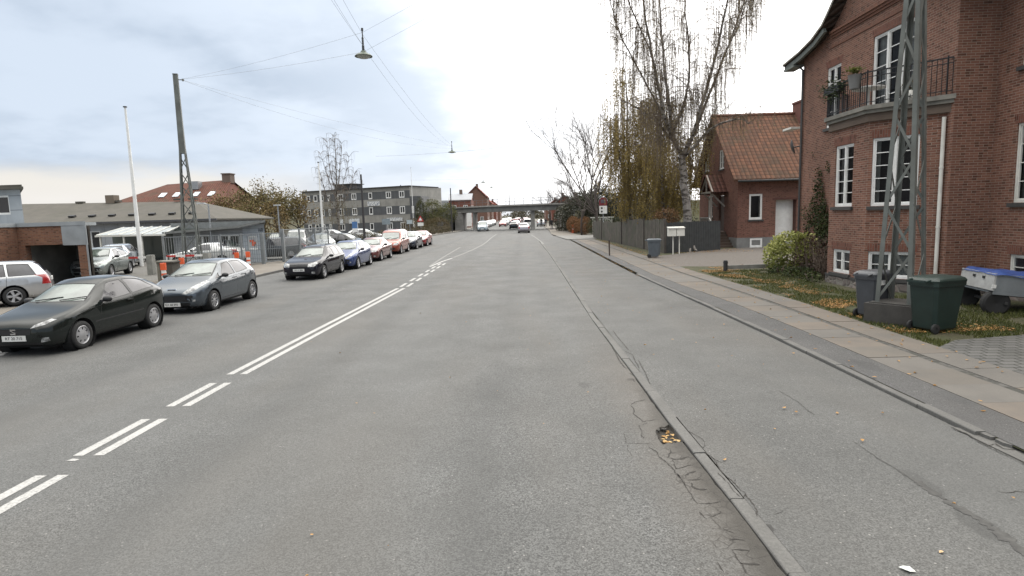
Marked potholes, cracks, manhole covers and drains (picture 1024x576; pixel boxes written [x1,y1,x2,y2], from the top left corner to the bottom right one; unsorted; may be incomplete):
pothole [656,425,684,445]
crack [612,331,760,573]
crack [855,427,1024,556]
